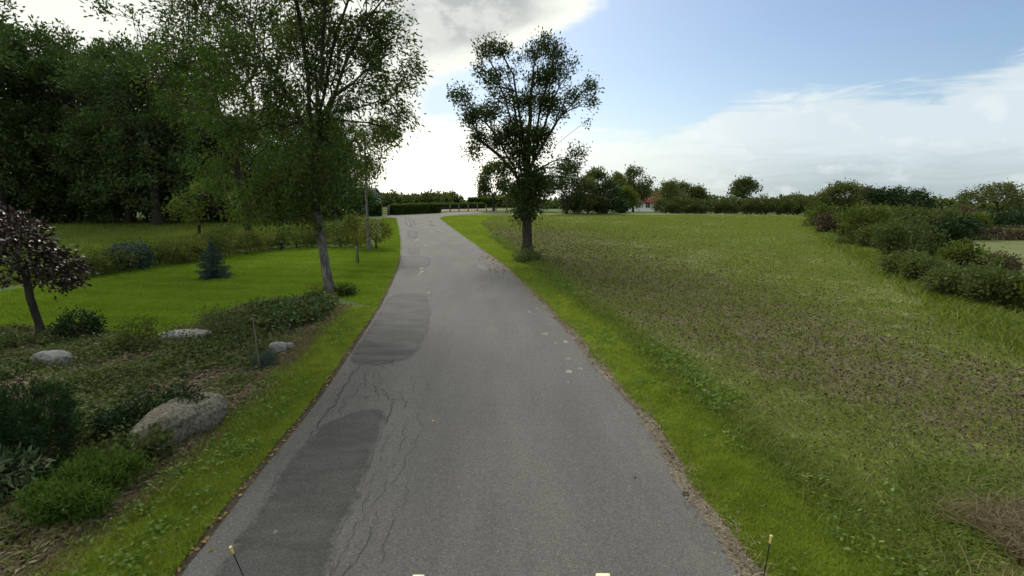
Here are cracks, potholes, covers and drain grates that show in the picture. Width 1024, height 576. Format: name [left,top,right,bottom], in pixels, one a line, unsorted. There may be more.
crack [308,360,429,576]
